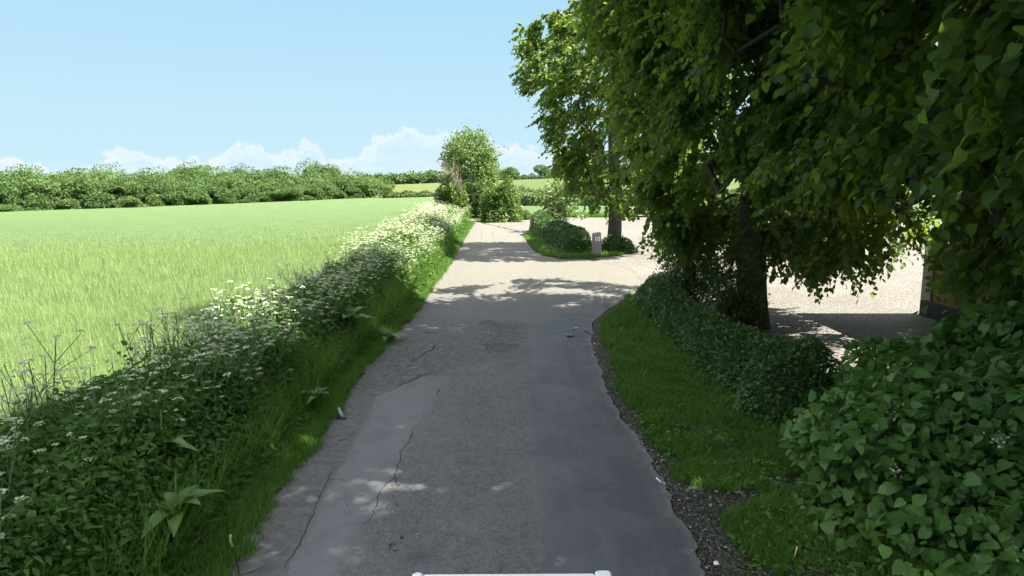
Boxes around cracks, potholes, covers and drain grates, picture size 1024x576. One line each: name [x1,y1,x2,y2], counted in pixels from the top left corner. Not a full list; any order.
crack [360,427,416,530]
crack [278,462,345,576]
crack [397,332,454,395]
